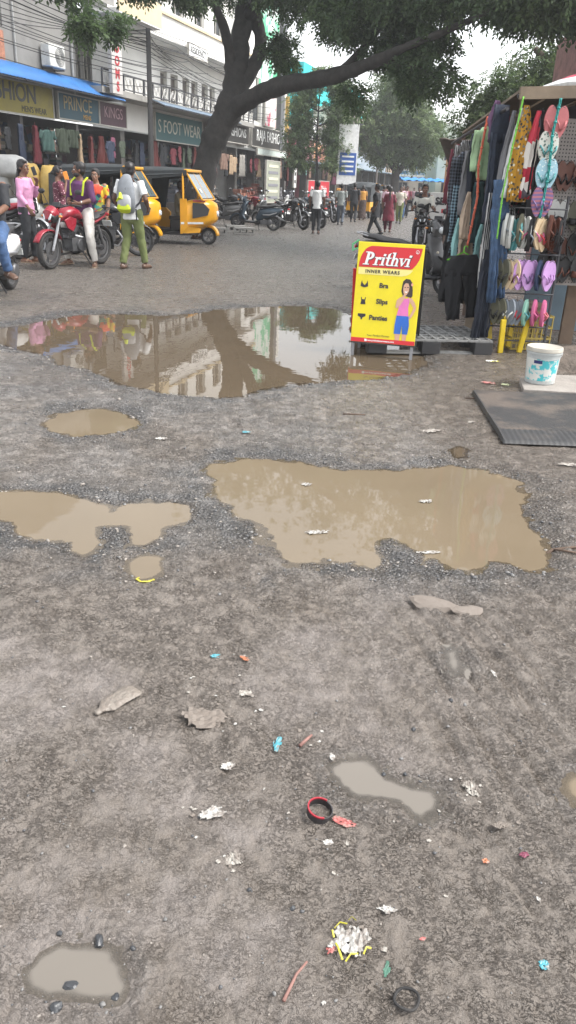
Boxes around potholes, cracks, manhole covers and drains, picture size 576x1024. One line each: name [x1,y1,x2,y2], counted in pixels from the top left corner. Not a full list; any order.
pothole [0,923,150,1024]
pothole [316,749,463,834]
pothole [0,301,456,405]
pothole [0,479,211,570]
pothole [176,448,576,588]
pothole [19,400,157,441]
